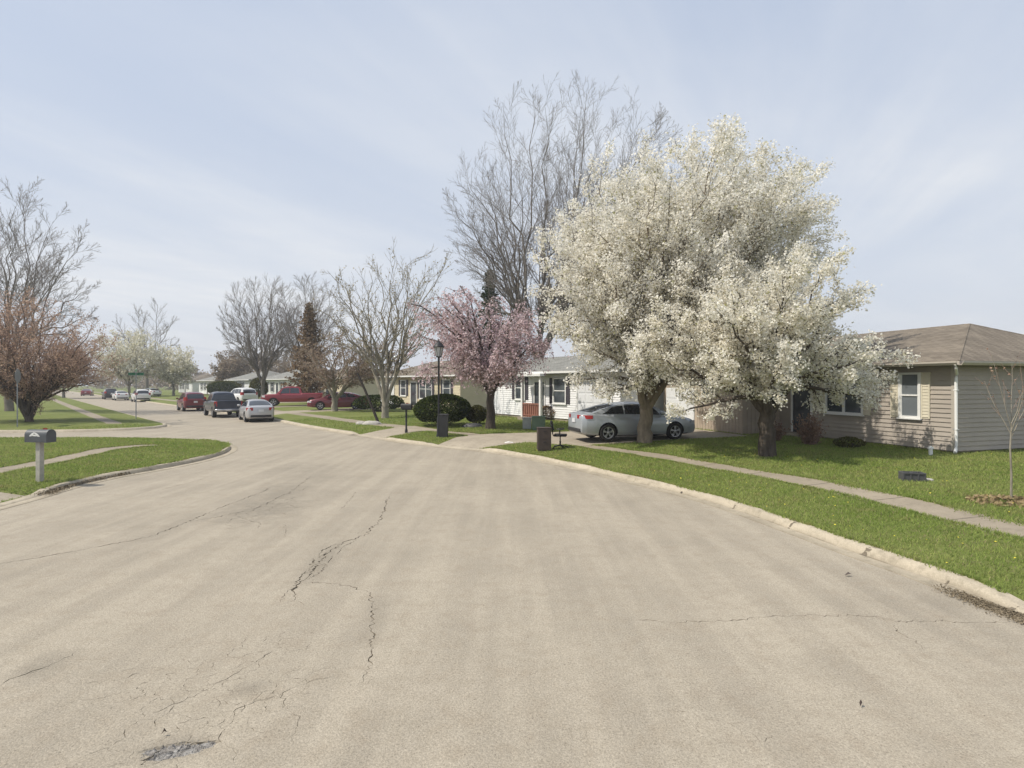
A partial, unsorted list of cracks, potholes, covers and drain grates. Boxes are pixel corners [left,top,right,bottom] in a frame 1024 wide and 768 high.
crack [0,479,308,564]
crack [280,496,390,683]
crack [66,632,337,768]
pothole [138,740,223,761]
crack [638,614,1001,653]
